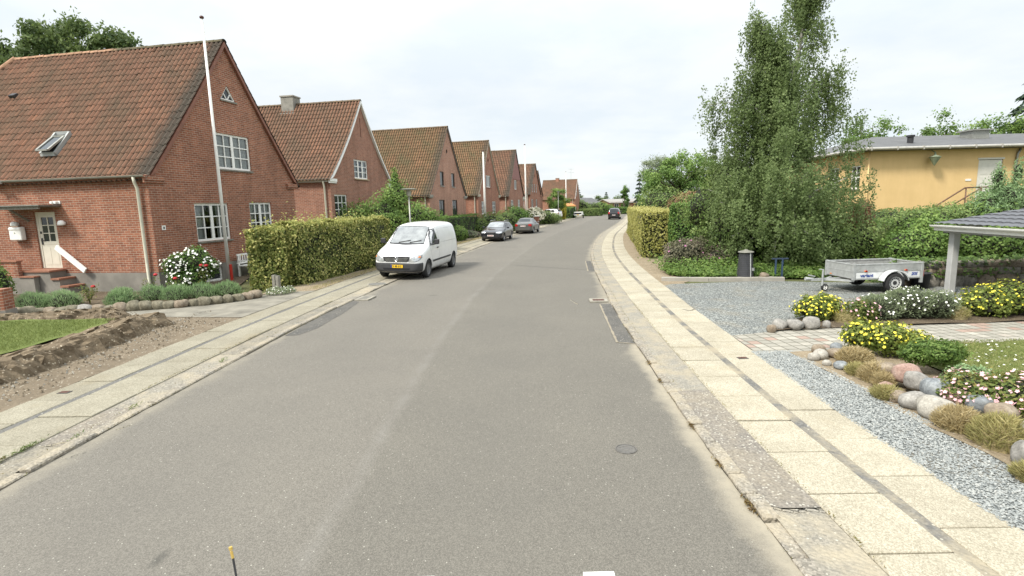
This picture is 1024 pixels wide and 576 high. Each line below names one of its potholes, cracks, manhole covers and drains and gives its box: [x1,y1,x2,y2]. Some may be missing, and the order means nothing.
manhole cover [615,444,637,454]
